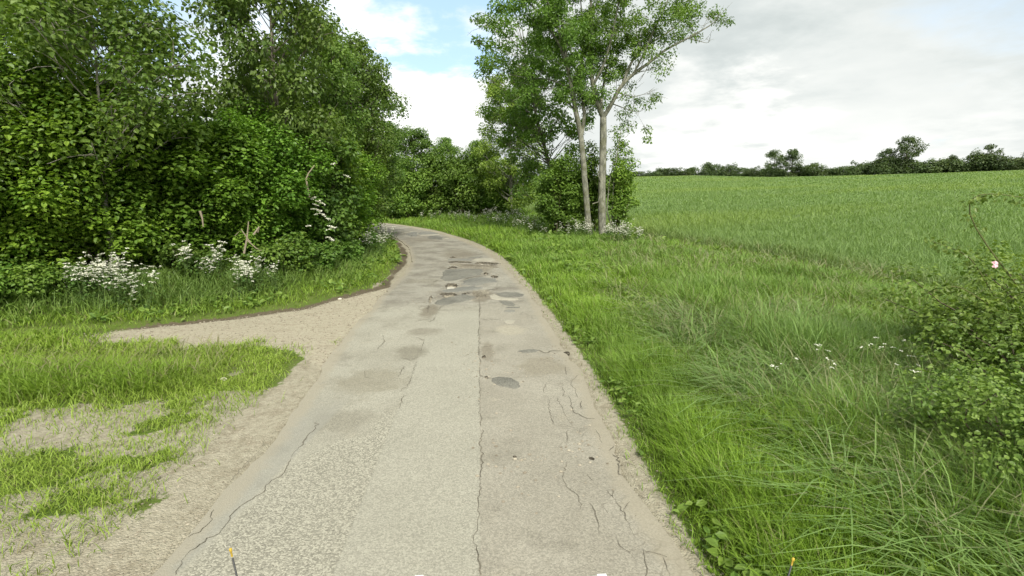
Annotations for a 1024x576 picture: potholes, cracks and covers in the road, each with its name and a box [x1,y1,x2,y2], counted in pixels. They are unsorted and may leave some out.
crack [175,422,317,573]
crack [539,350,594,439]
crack [563,446,669,575]
crack [398,280,444,408]
